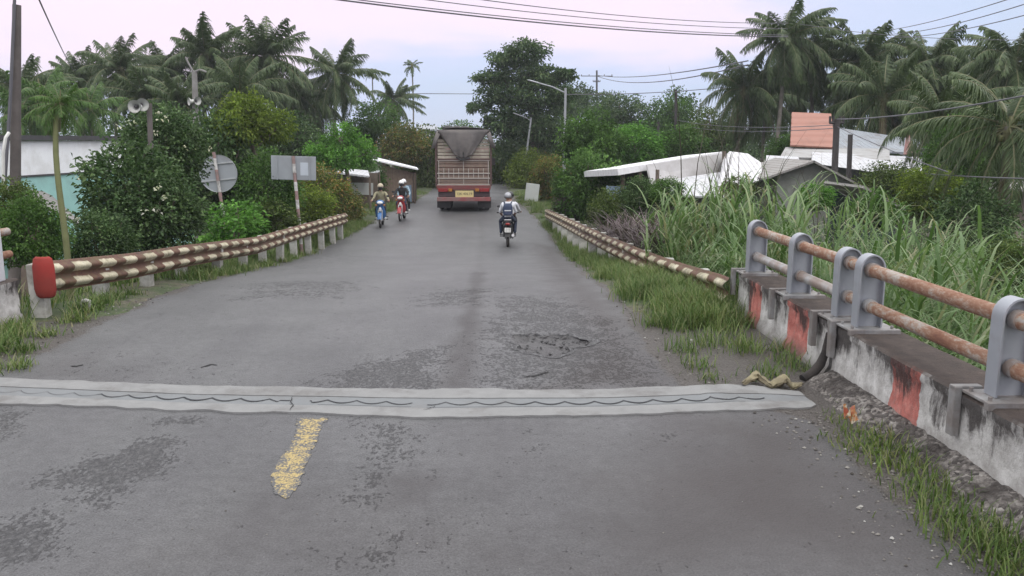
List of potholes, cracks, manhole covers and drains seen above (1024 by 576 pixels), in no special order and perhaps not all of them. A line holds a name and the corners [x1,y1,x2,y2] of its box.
pothole [504,332,601,359]
